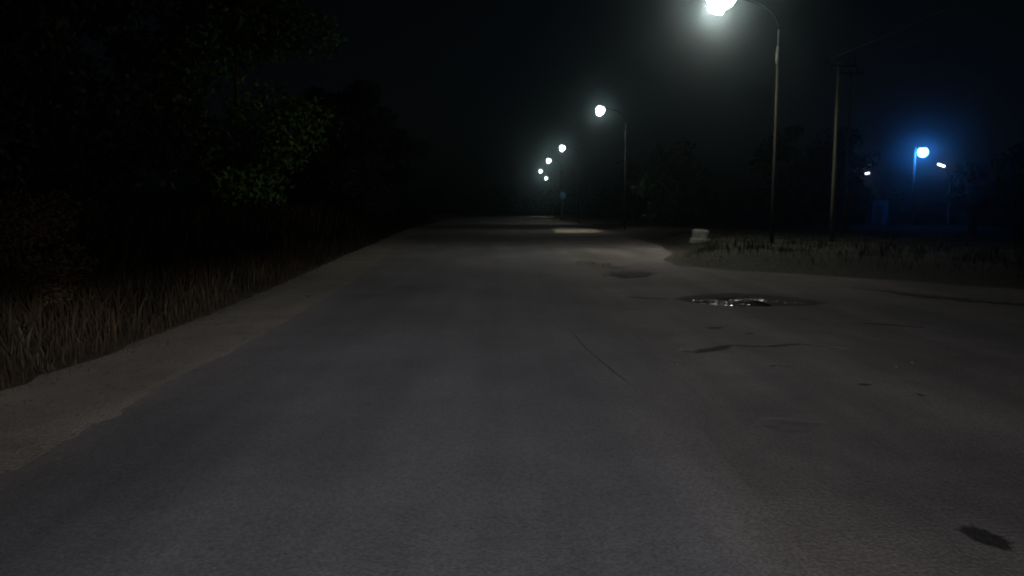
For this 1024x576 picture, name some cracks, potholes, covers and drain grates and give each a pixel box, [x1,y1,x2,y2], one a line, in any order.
pothole [674,293,830,306]
crack [679,321,929,368]
crack [570,330,641,392]
pothole [954,523,1017,552]
